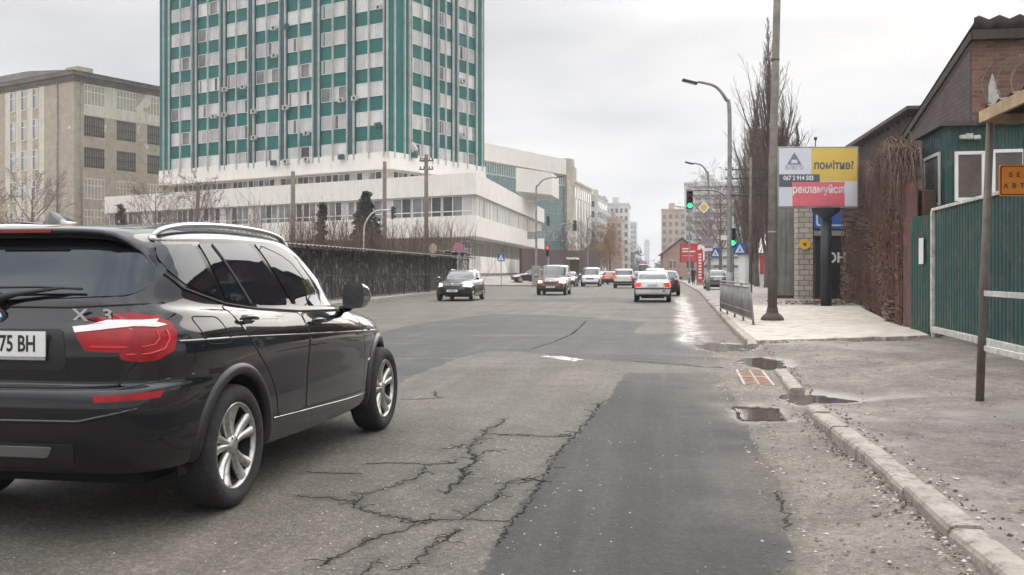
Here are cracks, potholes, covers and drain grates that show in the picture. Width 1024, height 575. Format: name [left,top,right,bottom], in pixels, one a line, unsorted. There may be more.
crack [774,491,792,531]
crack [297,403,603,575]
pothole [731,406,786,422]
